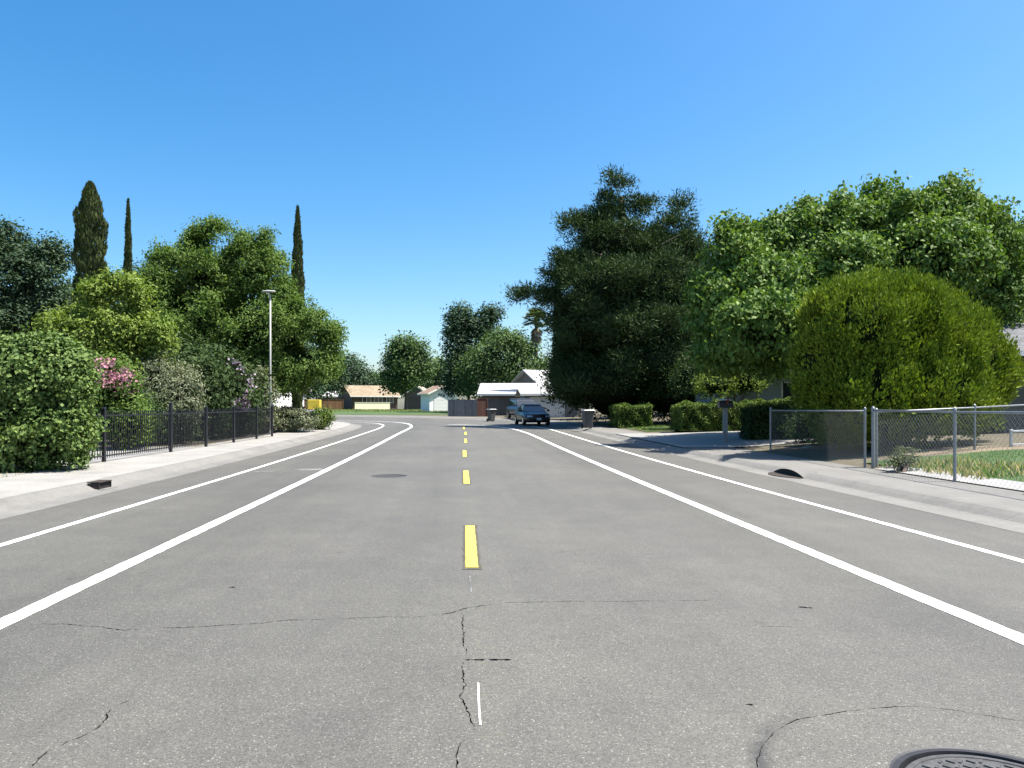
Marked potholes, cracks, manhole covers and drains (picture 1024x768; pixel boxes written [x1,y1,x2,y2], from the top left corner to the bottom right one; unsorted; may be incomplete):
crack [68,600,708,768]
crack [31,701,127,768]
drain grate [768,467,818,479]
drain grate [87,480,116,490]
manhole cover [889,746,1024,768]
